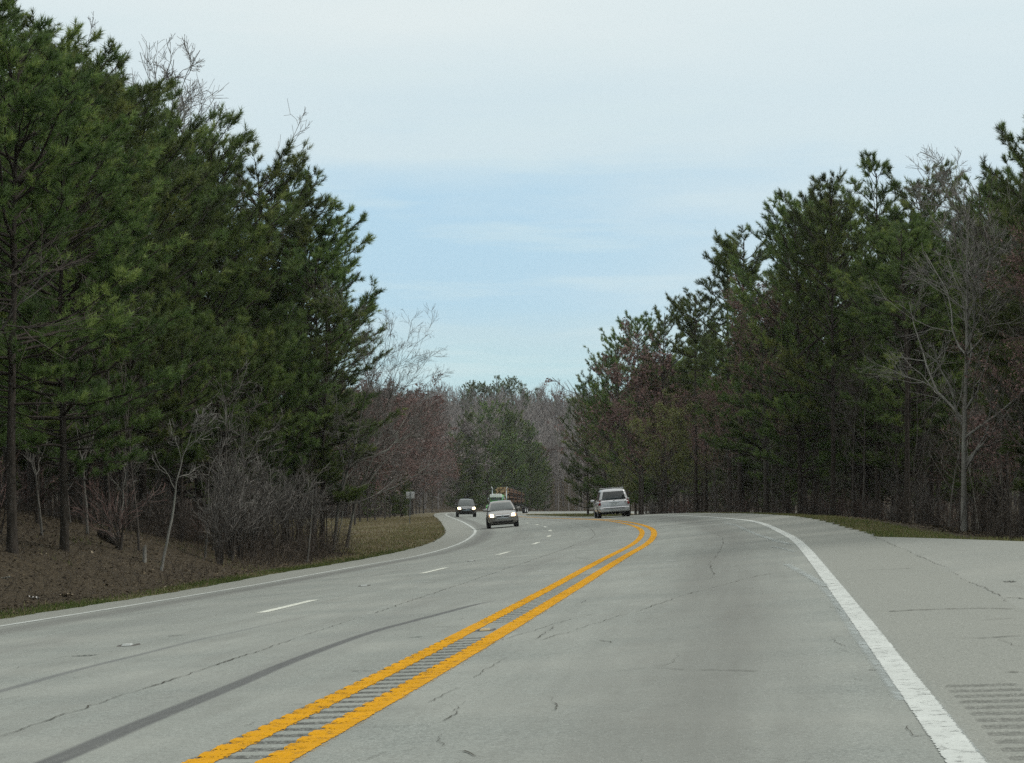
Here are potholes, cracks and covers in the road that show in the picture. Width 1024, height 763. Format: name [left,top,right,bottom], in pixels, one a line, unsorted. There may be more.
crack [428,538,765,756]
crack [1,529,595,736]
